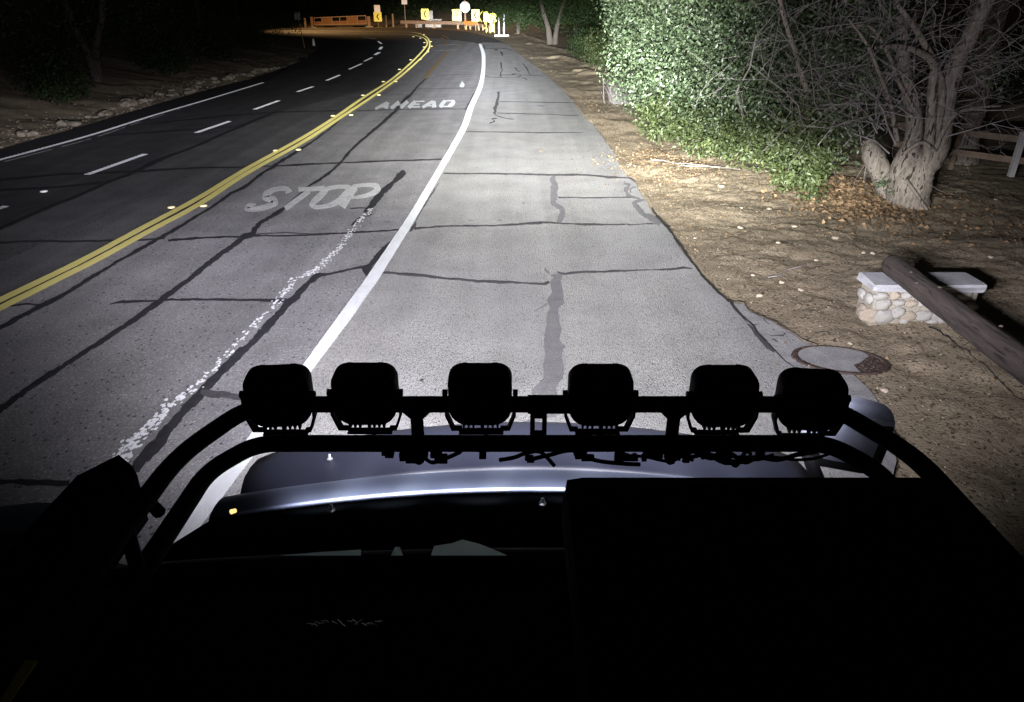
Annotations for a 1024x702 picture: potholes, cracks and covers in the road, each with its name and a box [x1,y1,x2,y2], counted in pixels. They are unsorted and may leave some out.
crack [0,158,636,199]
crack [0,208,831,367]
crack [483,44,539,80]
manhole cover [791,345,890,375]
